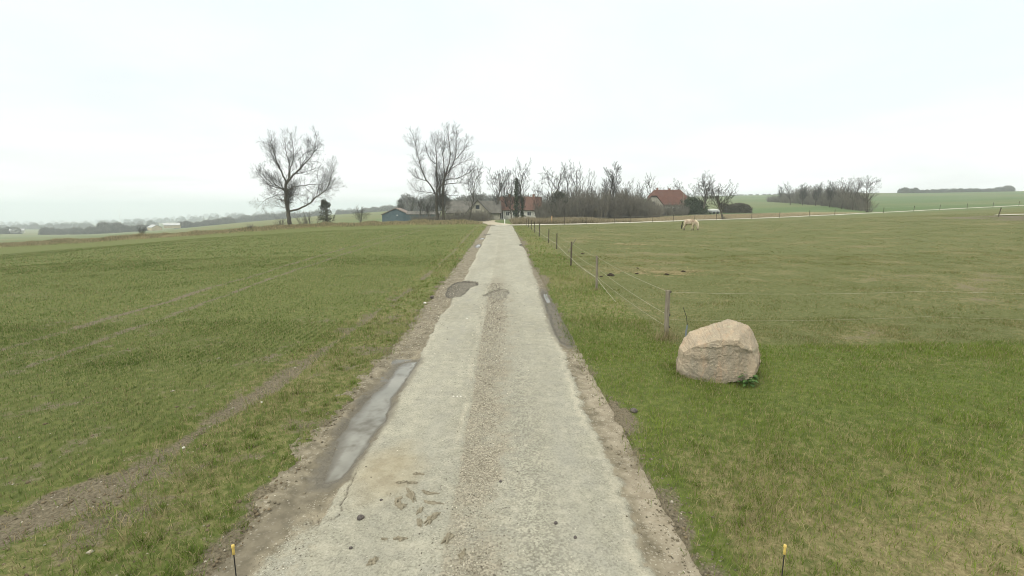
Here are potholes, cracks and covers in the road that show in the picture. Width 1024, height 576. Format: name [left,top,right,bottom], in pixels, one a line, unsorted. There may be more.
pothole [540,289,576,348]
crack [309,471,358,526]
pothole [308,358,422,492]
